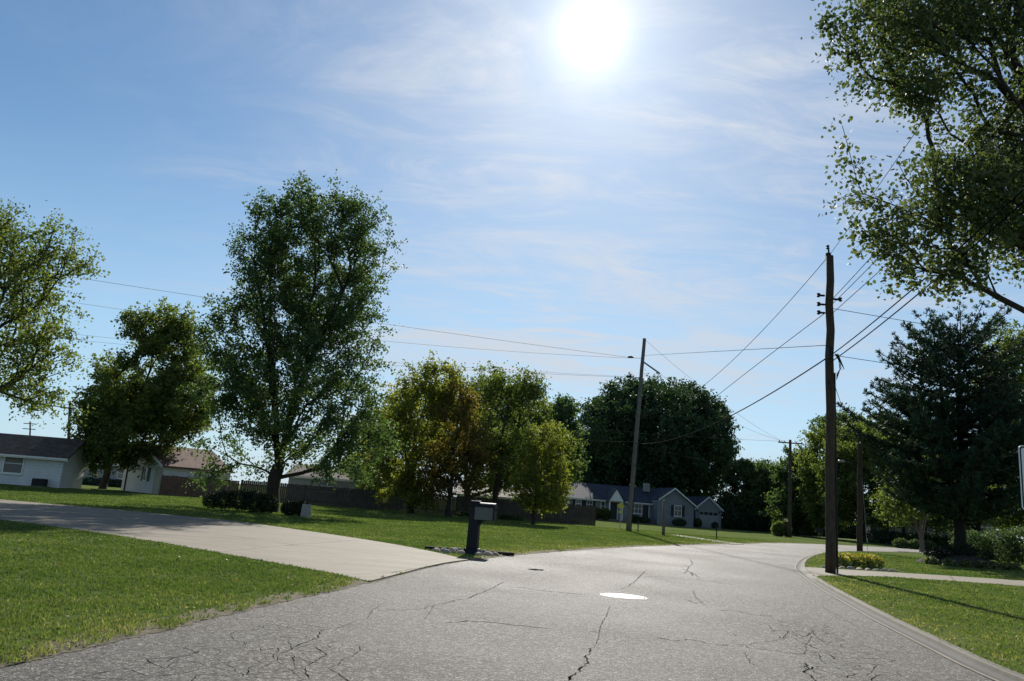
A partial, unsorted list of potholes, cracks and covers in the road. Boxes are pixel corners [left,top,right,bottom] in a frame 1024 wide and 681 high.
crack [568,607,610,681]
crack [622,560,910,681]
crack [85,606,380,681]
crack [383,582,583,629]
